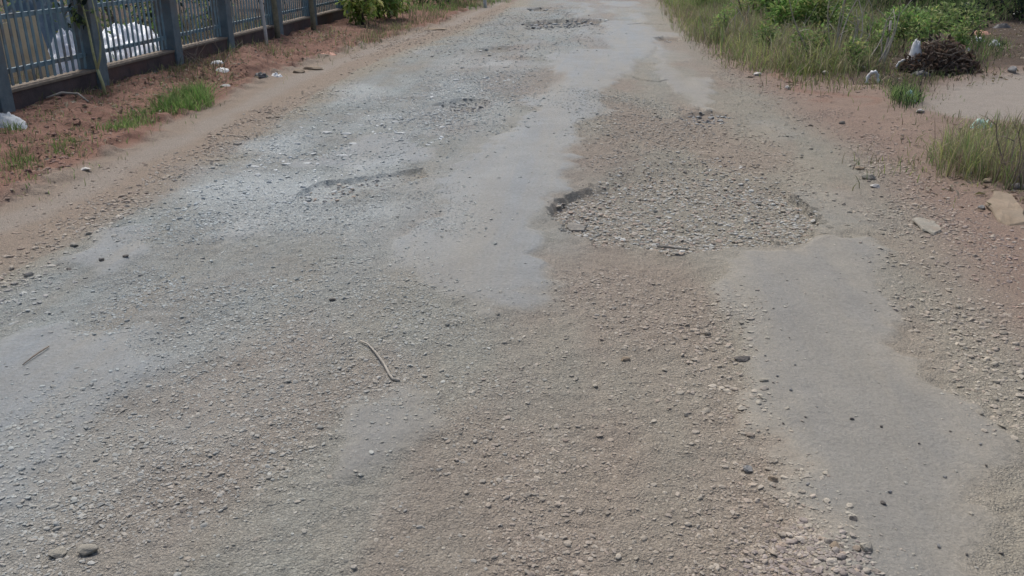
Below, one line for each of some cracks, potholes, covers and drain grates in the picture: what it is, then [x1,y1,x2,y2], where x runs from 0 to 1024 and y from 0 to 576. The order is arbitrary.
pothole [293,168,429,204]
pothole [432,98,496,113]
pothole [545,151,835,257]
pothole [520,18,614,30]
